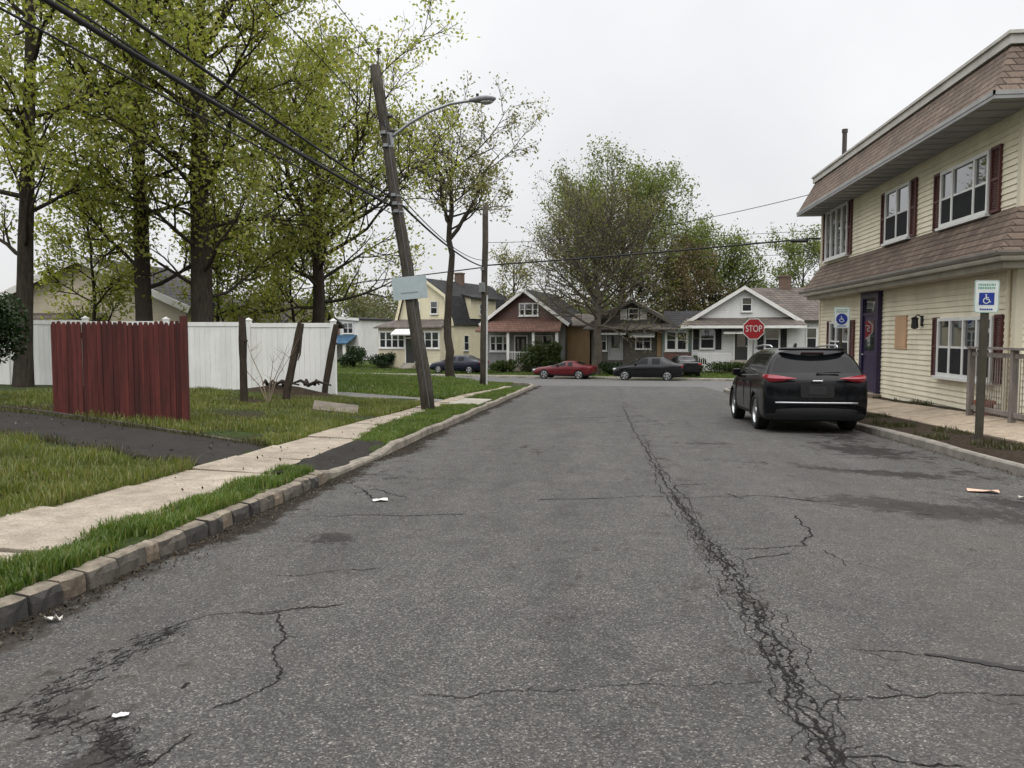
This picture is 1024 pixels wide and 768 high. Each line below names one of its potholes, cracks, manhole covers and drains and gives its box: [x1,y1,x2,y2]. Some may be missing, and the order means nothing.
crack [292,486,439,517]
crack [425,408,1024,768]
crack [0,604,340,768]
